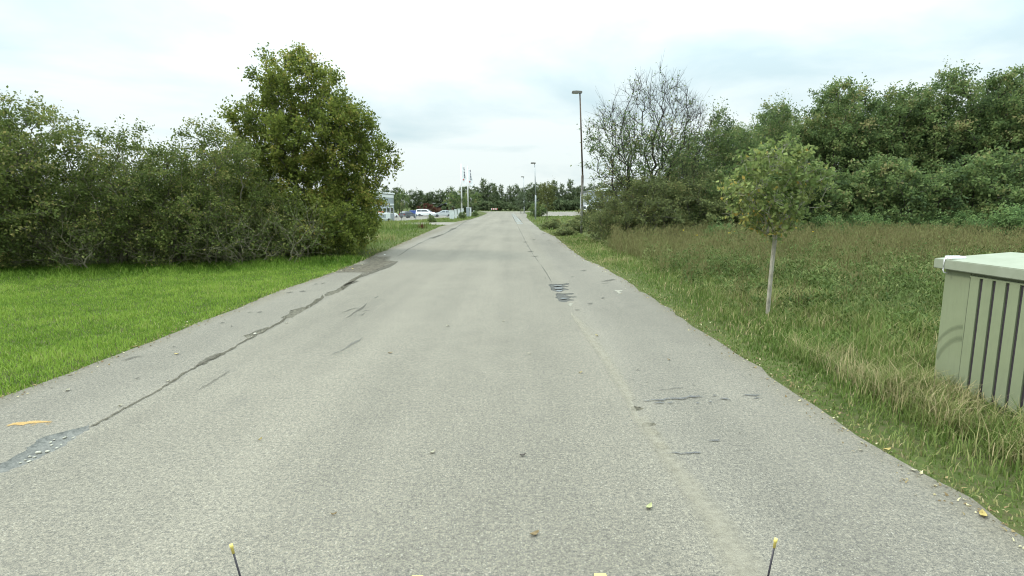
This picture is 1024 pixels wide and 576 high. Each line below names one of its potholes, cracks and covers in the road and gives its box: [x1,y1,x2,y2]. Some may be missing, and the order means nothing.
crack [91,274,378,426]
